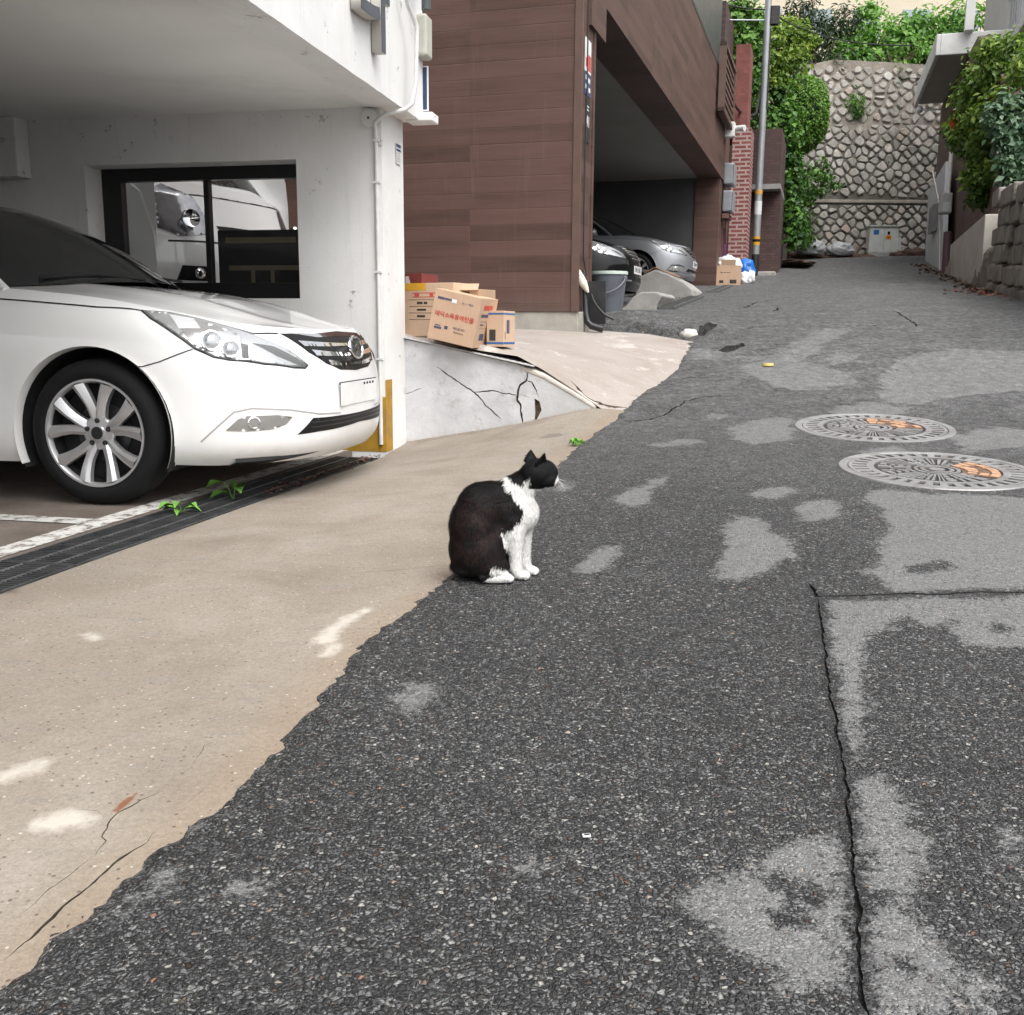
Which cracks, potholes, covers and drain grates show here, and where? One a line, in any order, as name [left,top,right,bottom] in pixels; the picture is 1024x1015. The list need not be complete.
drain grate [0,456,379,594]
crack [4,791,162,960]
manhole cover [838,451,1024,491]
crack [572,382,713,421]
pothole [719,343,746,352]
manhole cover [795,413,956,442]
pothole [697,323,718,336]
